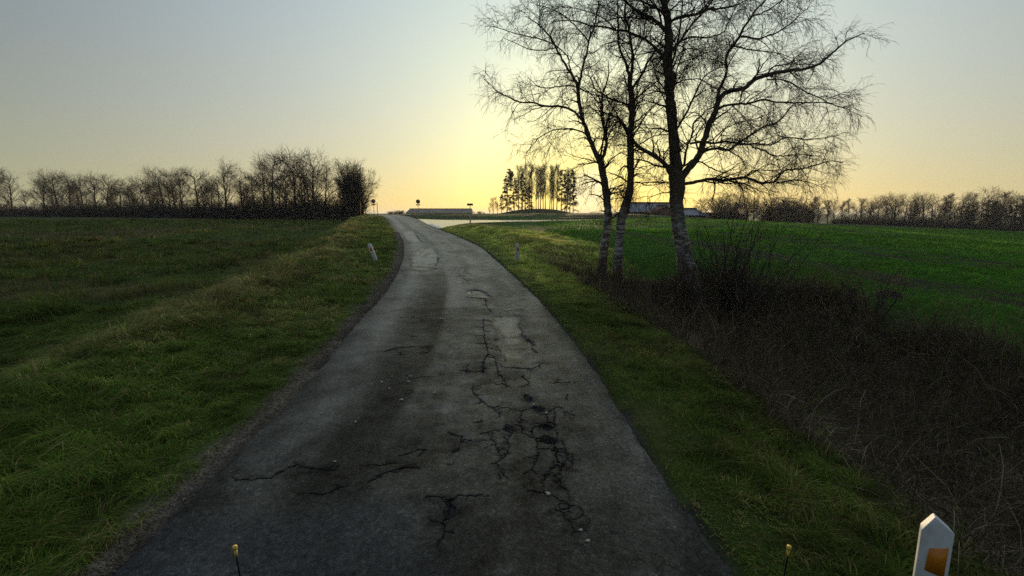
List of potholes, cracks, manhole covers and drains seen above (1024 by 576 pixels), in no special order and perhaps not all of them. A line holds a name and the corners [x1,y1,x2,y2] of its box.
crack [235,462,348,495]
crack [425,297,588,547]
